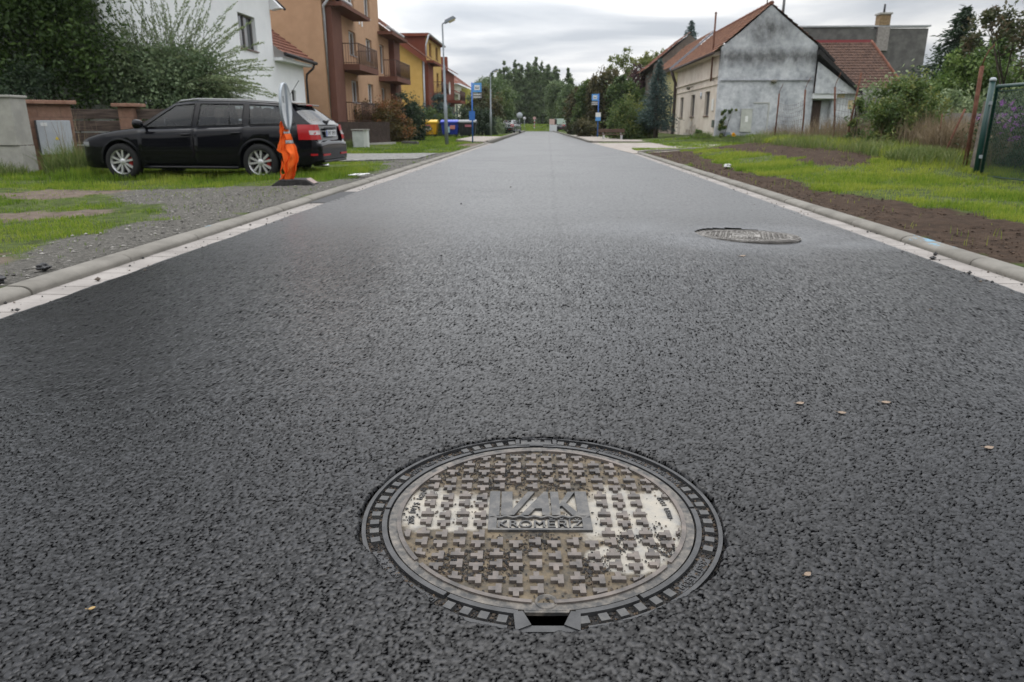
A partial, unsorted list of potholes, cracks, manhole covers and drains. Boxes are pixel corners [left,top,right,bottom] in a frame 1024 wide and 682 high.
manhole cover [695,229,801,244]
manhole cover [358,437,725,634]
